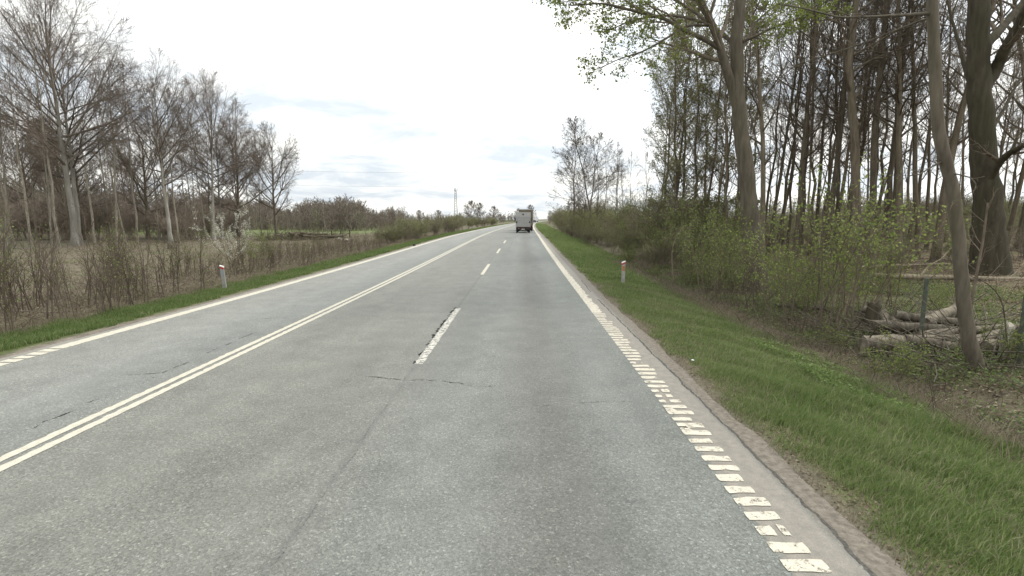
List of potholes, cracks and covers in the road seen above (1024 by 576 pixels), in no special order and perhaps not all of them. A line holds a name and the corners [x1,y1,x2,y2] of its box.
crack [135,318,270,378]
crack [377,307,491,387]
